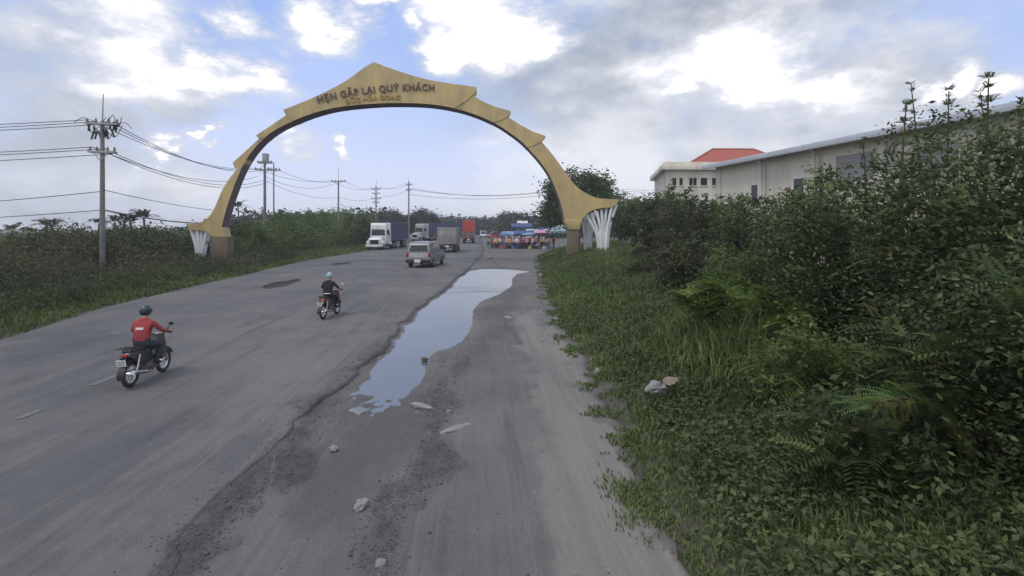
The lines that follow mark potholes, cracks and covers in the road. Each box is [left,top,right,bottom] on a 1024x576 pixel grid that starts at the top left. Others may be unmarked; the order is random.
pothole [268,267,537,557]
